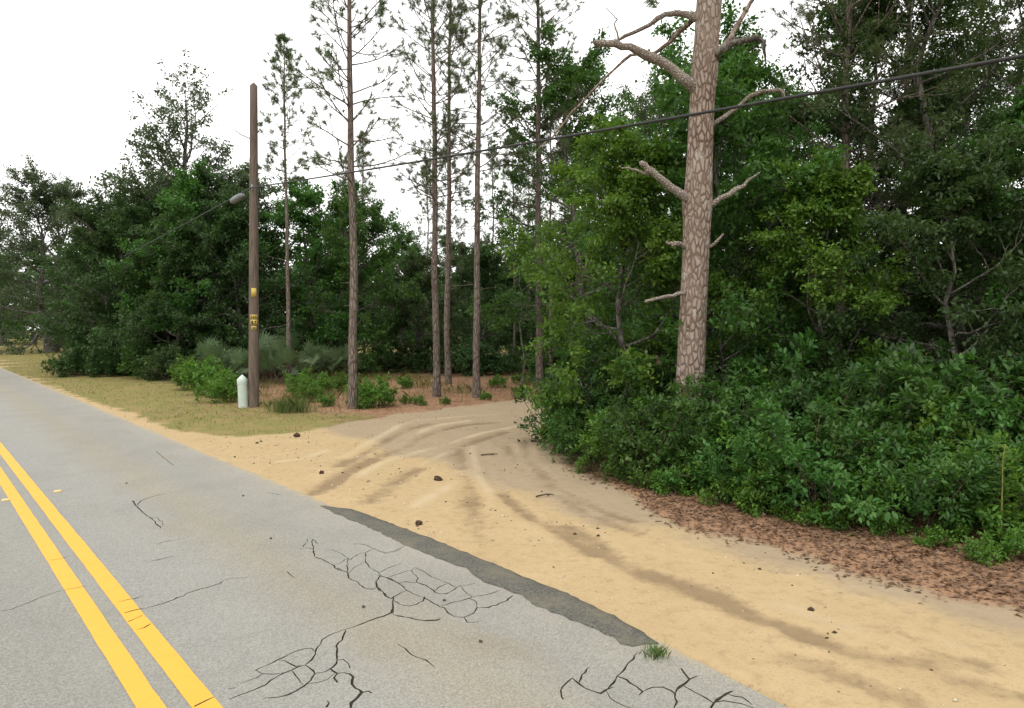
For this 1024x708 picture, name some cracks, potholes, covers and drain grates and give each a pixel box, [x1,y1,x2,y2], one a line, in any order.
crack [229,539,513,708]
crack [132,494,181,562]
crack [560,653,753,708]
crack [126,578,231,628]
